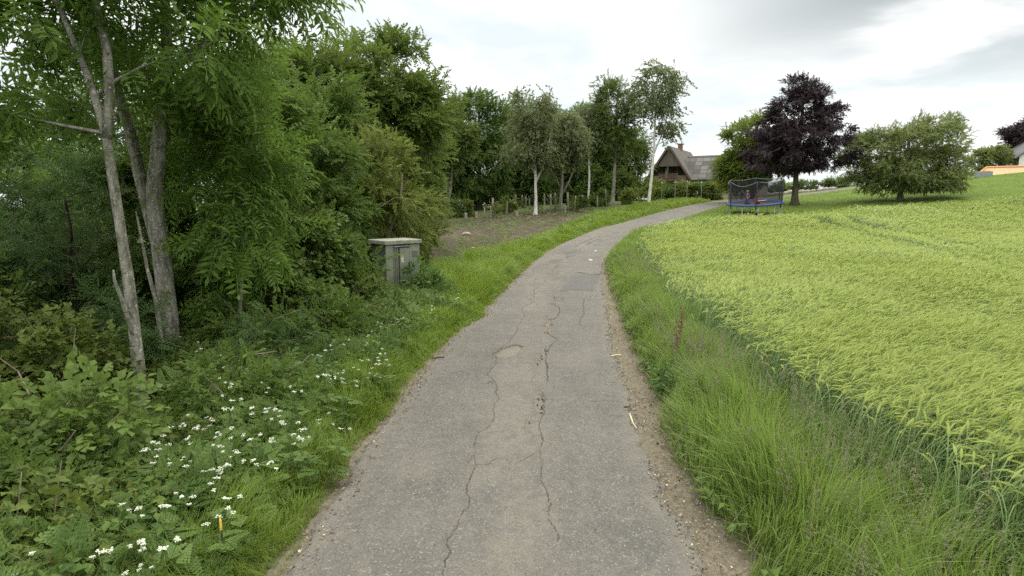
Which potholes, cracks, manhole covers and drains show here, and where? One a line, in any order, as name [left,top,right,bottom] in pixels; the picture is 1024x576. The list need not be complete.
pothole [495,344,524,357]
crack [517,232,618,541]
crack [442,280,546,576]
